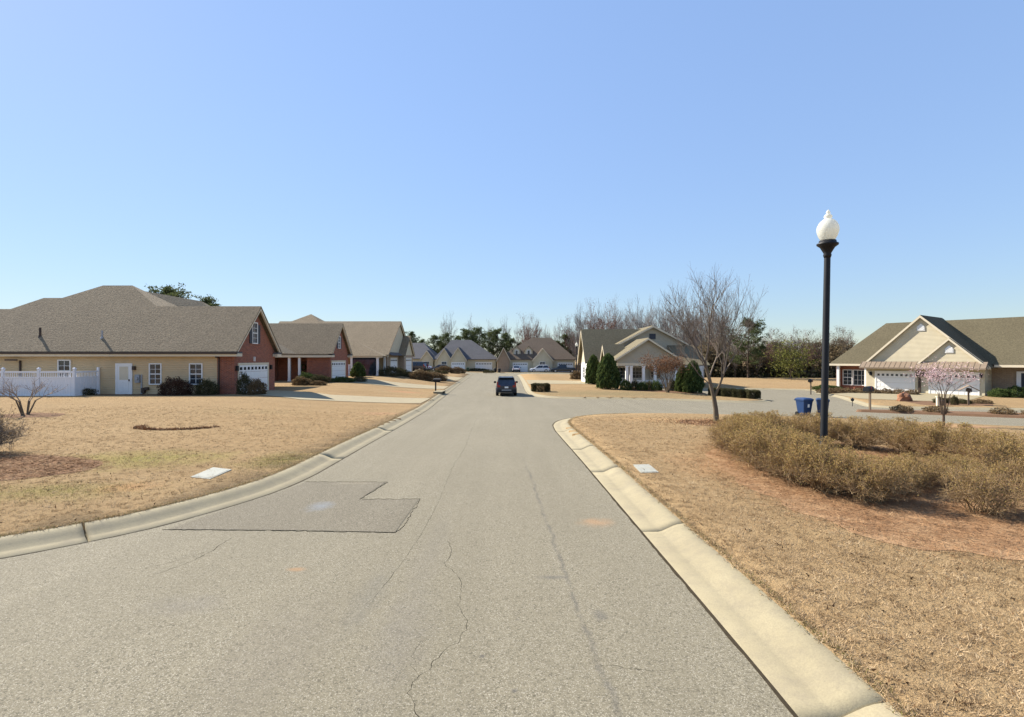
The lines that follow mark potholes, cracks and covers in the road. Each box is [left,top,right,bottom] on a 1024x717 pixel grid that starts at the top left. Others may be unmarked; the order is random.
utility cover [191,467,232,479]
crack [407,541,468,717]
utility cover [633,464,658,473]
